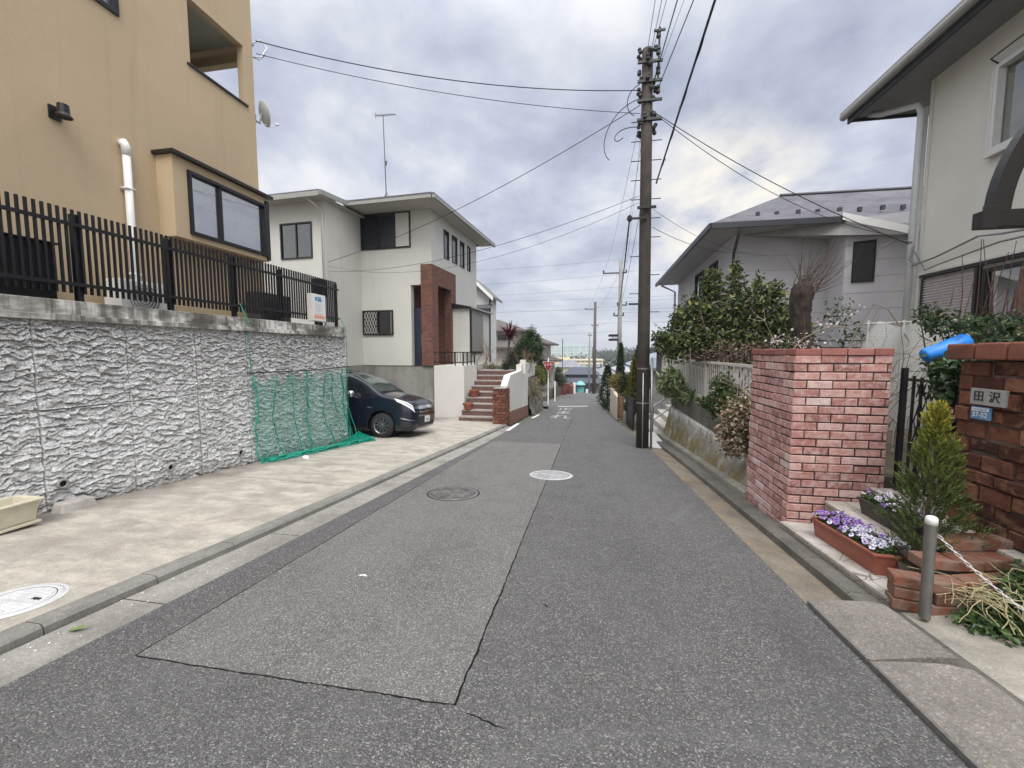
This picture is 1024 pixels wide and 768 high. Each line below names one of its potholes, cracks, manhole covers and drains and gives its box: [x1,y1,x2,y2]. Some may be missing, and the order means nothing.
manhole cover [0,583,70,619]
manhole cover [427,487,480,501]
manhole cover [529,470,573,480]
